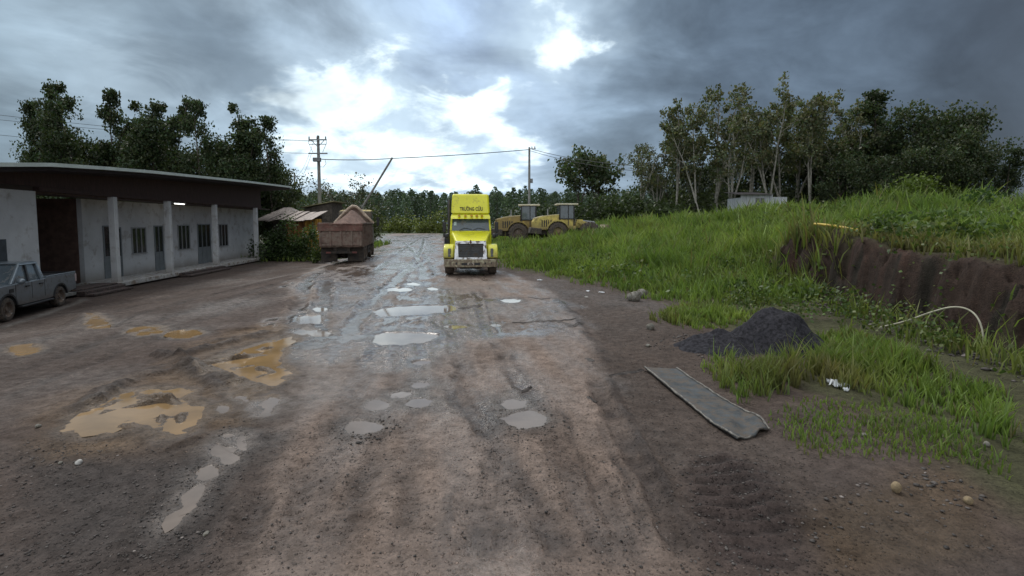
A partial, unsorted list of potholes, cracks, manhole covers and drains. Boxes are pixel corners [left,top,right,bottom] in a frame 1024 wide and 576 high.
pothole [353,396,400,414]
pothole [483,407,562,433]
pothole [52,382,219,445]
pothole [80,312,120,329]
pothole [0,341,53,358]
pothole [488,389,542,410]
crack [512,318,583,327]
pothole [363,330,449,346]
pothole [194,439,255,468]
pothole [159,326,212,340]
pothole [190,334,310,394]
pothole [368,304,463,317]
